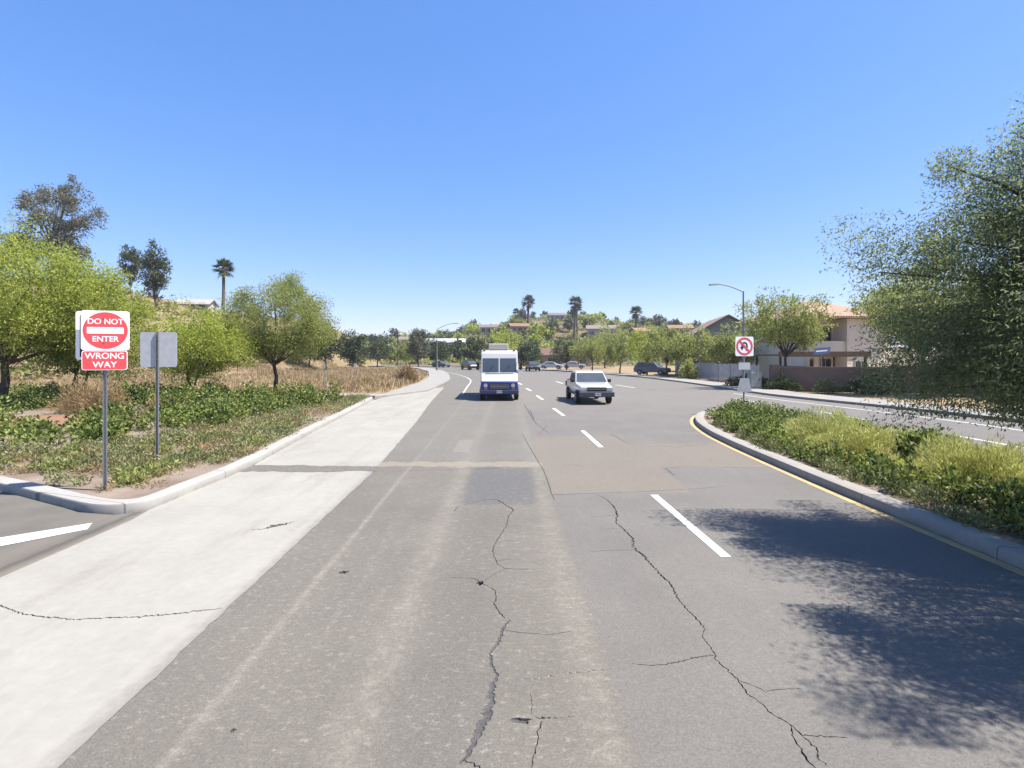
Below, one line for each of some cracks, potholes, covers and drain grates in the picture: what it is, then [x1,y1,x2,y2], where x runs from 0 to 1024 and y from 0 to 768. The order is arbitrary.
crack [555,466,847,768]
crack [452,499,608,768]
crack [0,605,219,620]
